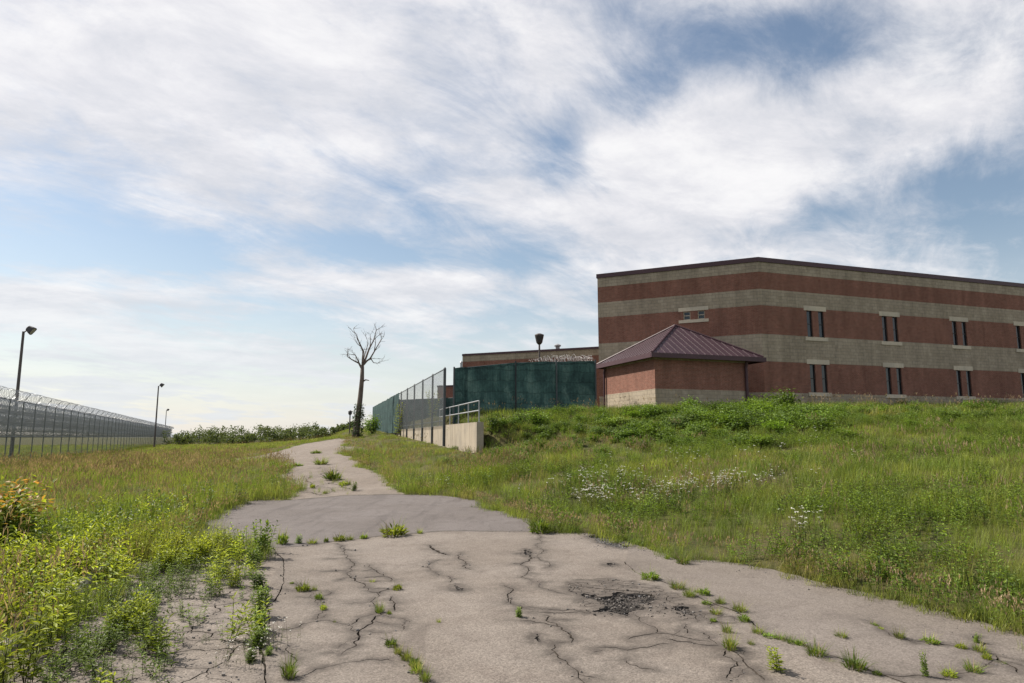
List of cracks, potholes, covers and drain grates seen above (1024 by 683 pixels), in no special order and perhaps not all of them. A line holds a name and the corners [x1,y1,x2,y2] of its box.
pothole [576,589,678,617]
crack [280,543,428,683]
crack [505,534,765,683]
crack [427,545,471,582]
